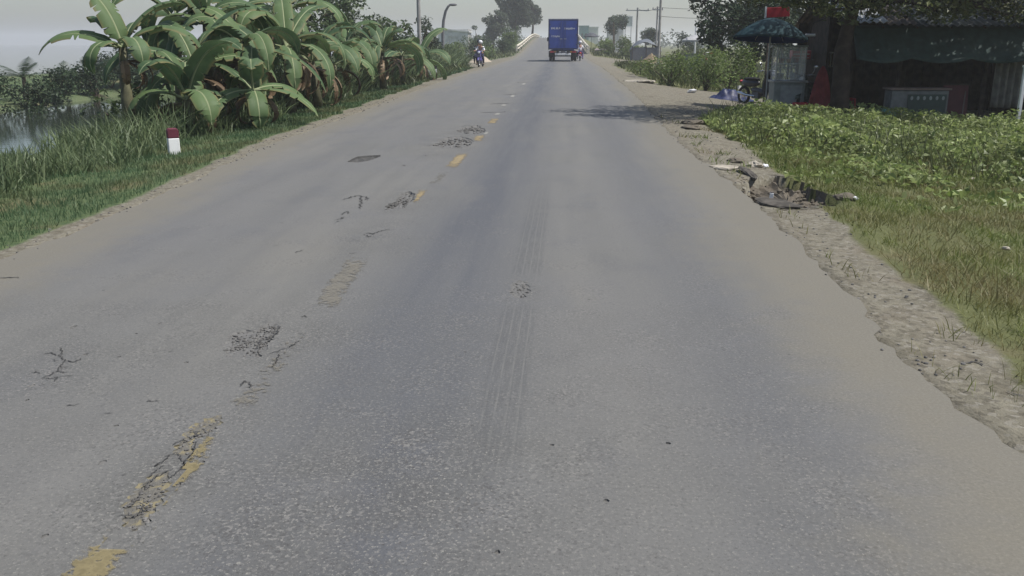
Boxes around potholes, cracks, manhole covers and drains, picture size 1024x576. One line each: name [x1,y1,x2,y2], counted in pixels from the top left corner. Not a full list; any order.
pothole [430,136,474,148]
crack [336,195,369,220]
pothole [385,191,415,210]
crack [118,433,209,516]
pothole [222,320,280,359]
crack [30,347,81,388]
pothole [510,280,531,298]
pothole [457,125,486,134]
crack [240,315,306,388]
